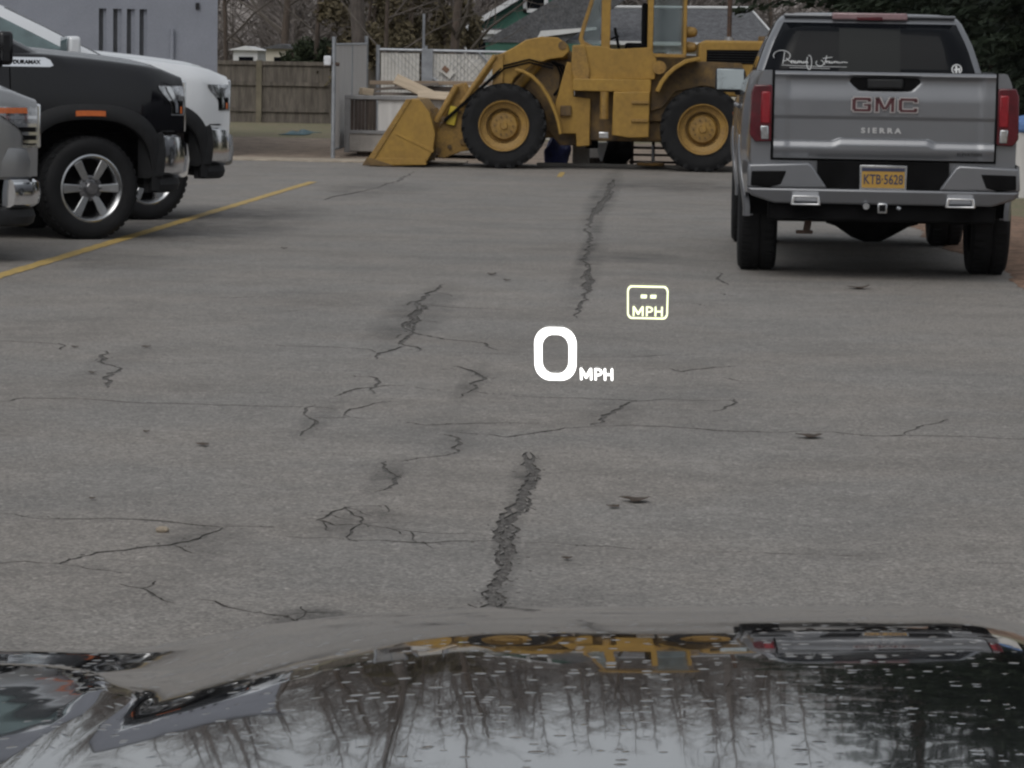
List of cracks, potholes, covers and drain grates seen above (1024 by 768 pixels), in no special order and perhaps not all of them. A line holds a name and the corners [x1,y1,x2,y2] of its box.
crack [120,581,173,603]
crack [279,284,1002,608]
crack [573,179,616,318]
crack [2,351,434,436]
crack [6,514,264,573]
crack [201,599,329,621]
